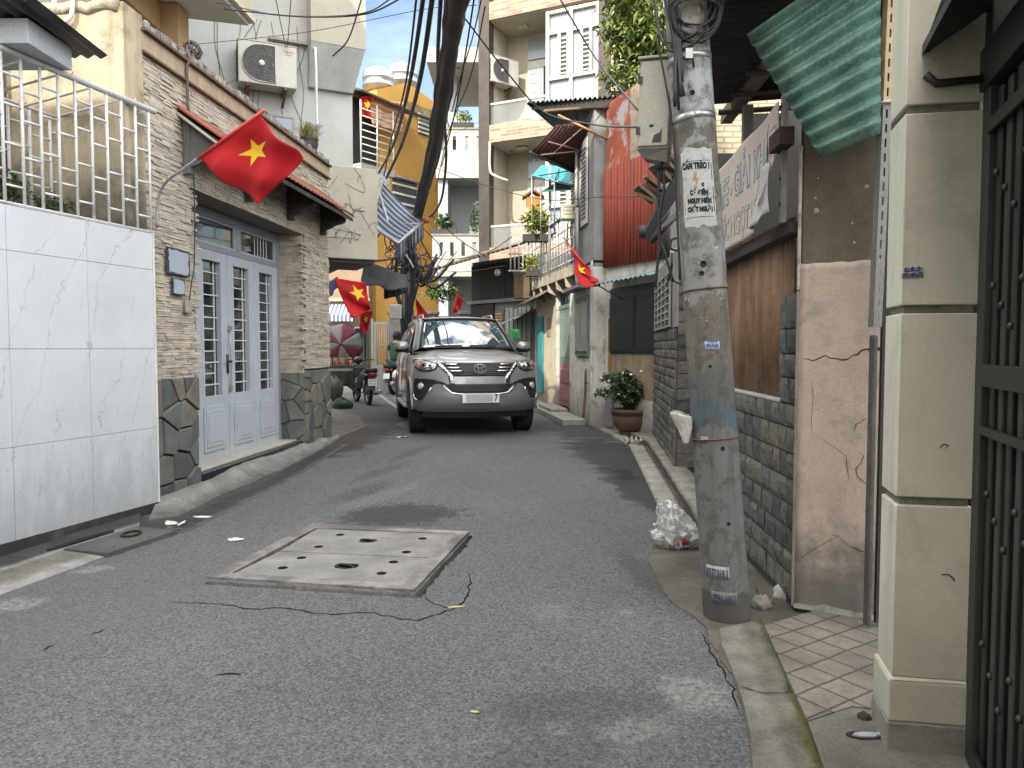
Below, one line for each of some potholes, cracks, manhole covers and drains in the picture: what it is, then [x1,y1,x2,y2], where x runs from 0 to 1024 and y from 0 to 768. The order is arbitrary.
crack [176,572,472,621]
manhole cover [46,527,177,558]
manhole cover [206,523,472,598]
